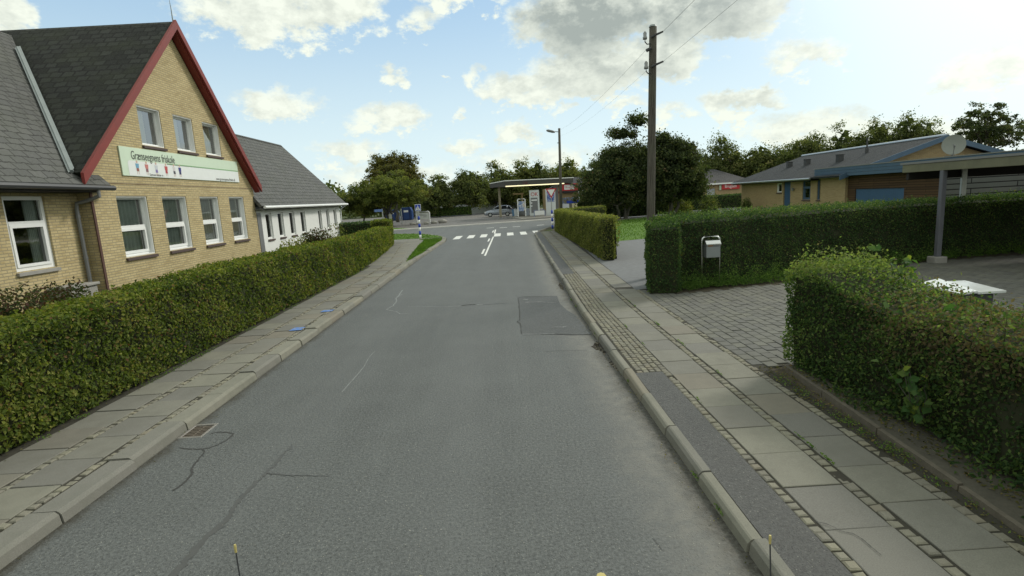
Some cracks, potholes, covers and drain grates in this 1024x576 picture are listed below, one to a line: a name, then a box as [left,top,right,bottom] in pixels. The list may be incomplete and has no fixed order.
crack [172,431,234,491]
drain grate [177,423,218,439]
crack [386,290,500,314]
